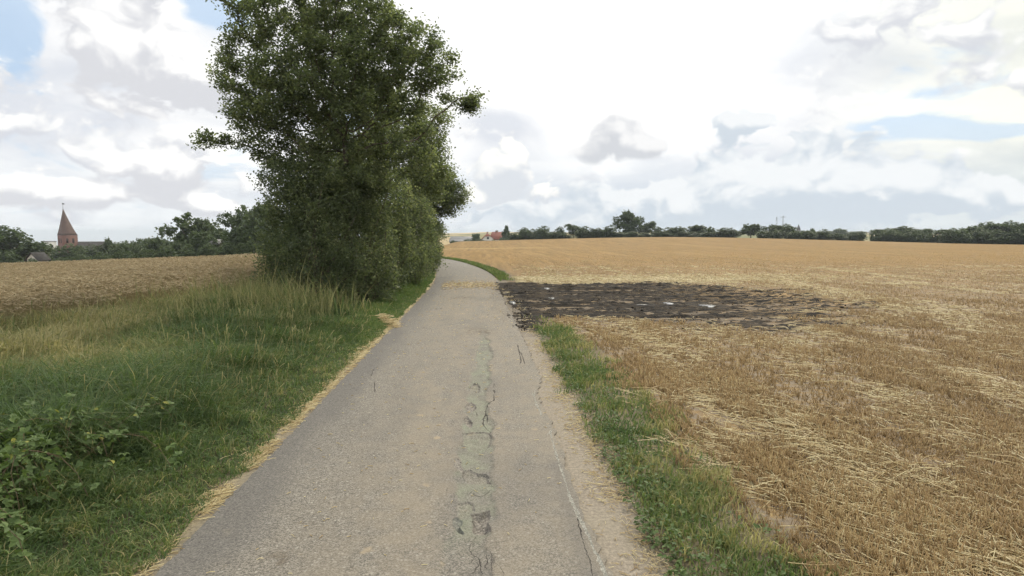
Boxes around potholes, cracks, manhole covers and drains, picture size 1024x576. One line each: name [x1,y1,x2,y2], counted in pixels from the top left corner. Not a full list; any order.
crack [532,389,608,576]
crack [476,384,495,433]
pothole [471,510,491,535]
crack [449,537,505,576]
